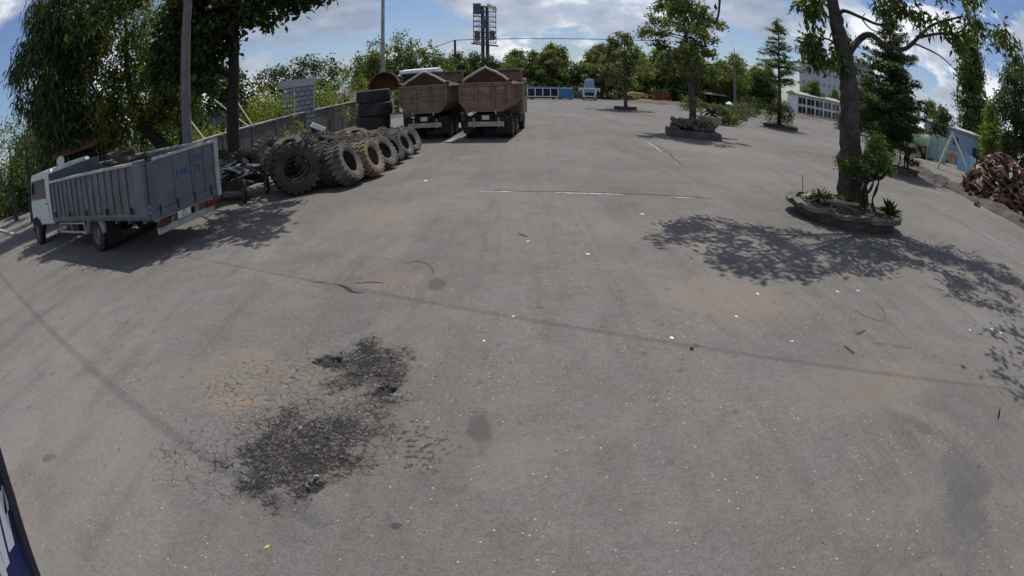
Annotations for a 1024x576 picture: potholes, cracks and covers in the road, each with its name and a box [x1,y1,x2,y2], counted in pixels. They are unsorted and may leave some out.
pothole [370,385,397,398]
pothole [305,481,324,496]
crack [140,325,462,528]
pothole [312,355,343,369]
